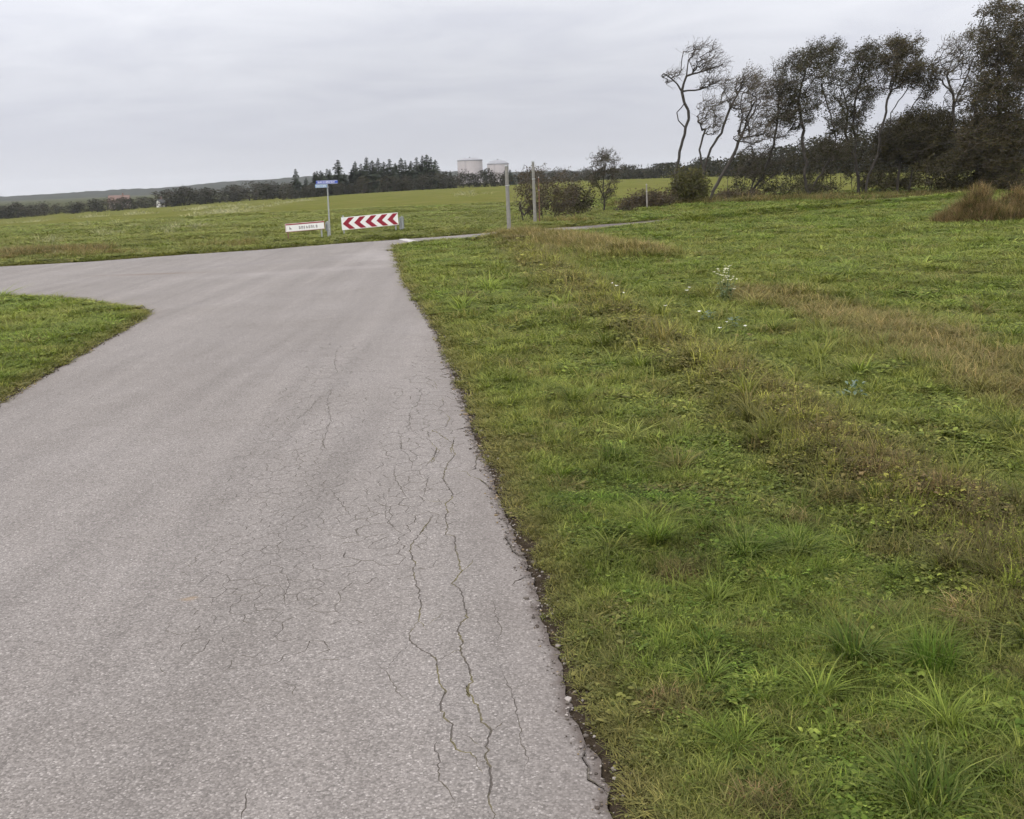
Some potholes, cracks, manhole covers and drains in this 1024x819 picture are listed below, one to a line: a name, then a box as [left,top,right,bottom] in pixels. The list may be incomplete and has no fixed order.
crack [157,336,531,819]
